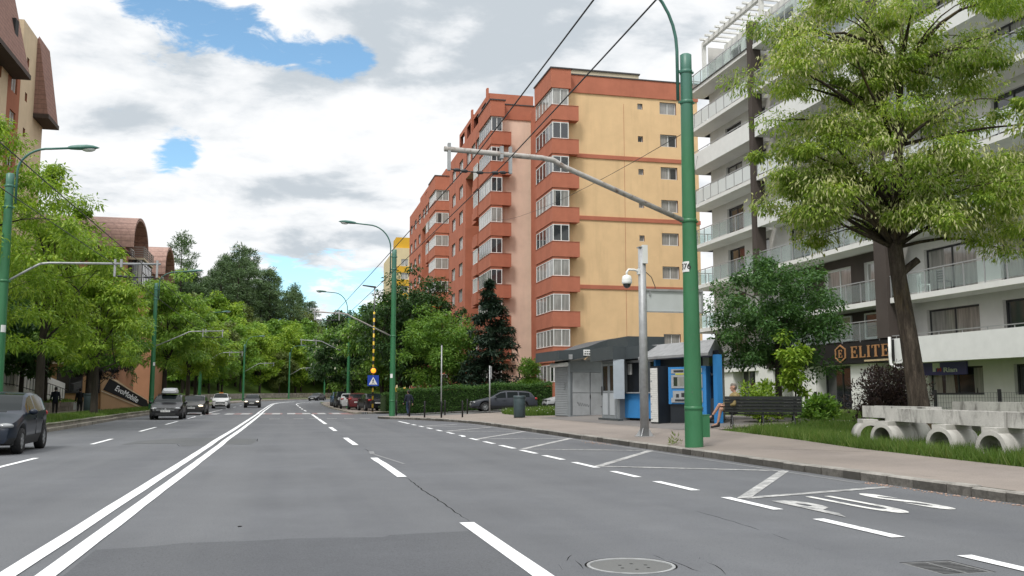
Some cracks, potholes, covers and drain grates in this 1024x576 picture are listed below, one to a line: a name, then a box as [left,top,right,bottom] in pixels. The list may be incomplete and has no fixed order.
drain grate [899,560,995,575]
manhole cover [585,557,678,574]
crack [343,436,469,521]
